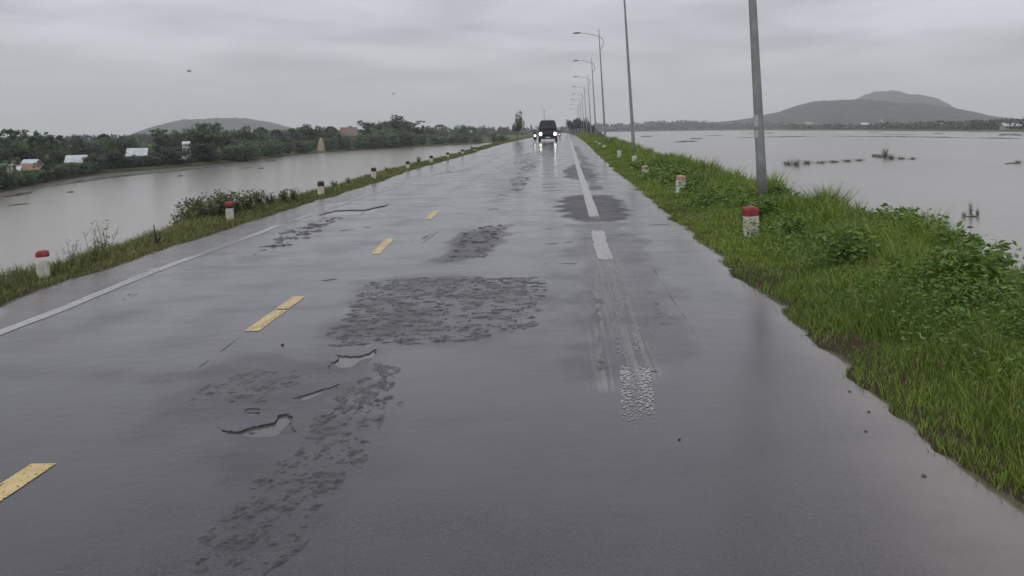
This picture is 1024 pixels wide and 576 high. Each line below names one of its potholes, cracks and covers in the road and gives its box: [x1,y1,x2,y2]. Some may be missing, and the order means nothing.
pothole [329,349,377,368]
crack [190,152,609,576]
pothole [217,413,297,437]
